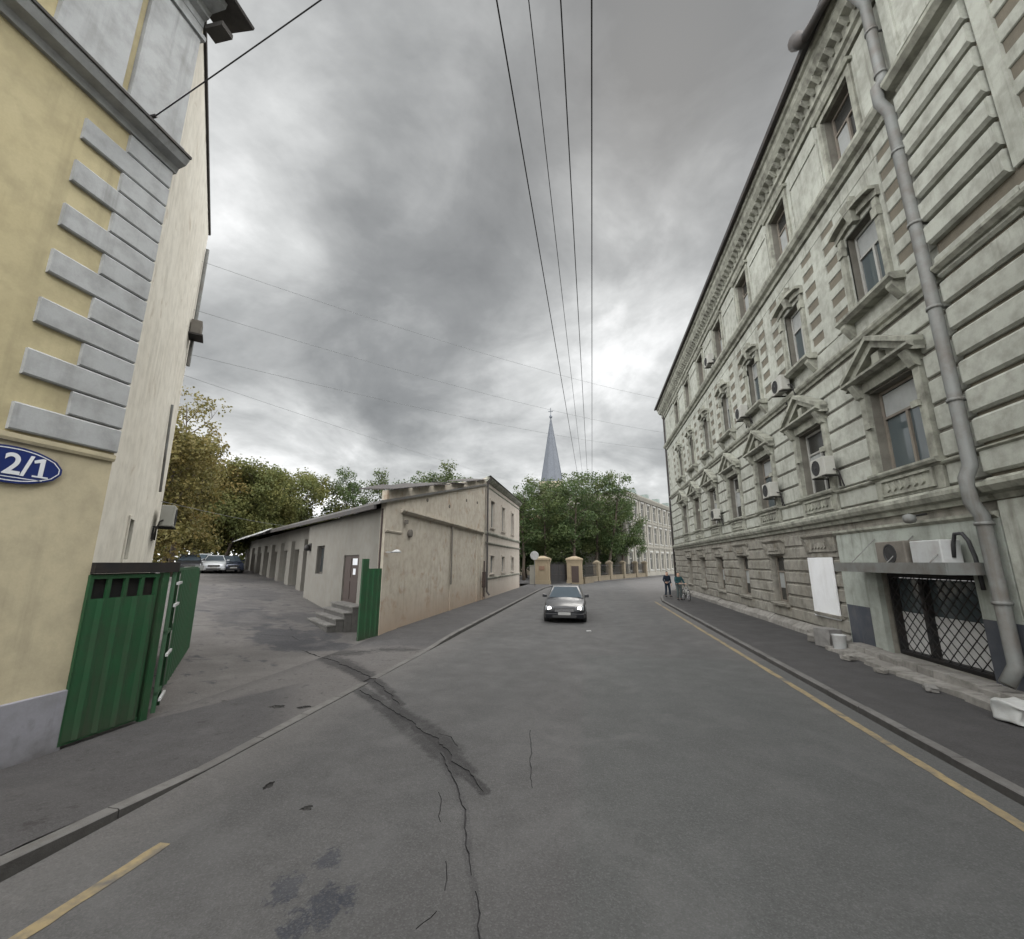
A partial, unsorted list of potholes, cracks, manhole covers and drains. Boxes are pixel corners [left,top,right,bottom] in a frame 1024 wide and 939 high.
crack [265,625,483,939]
